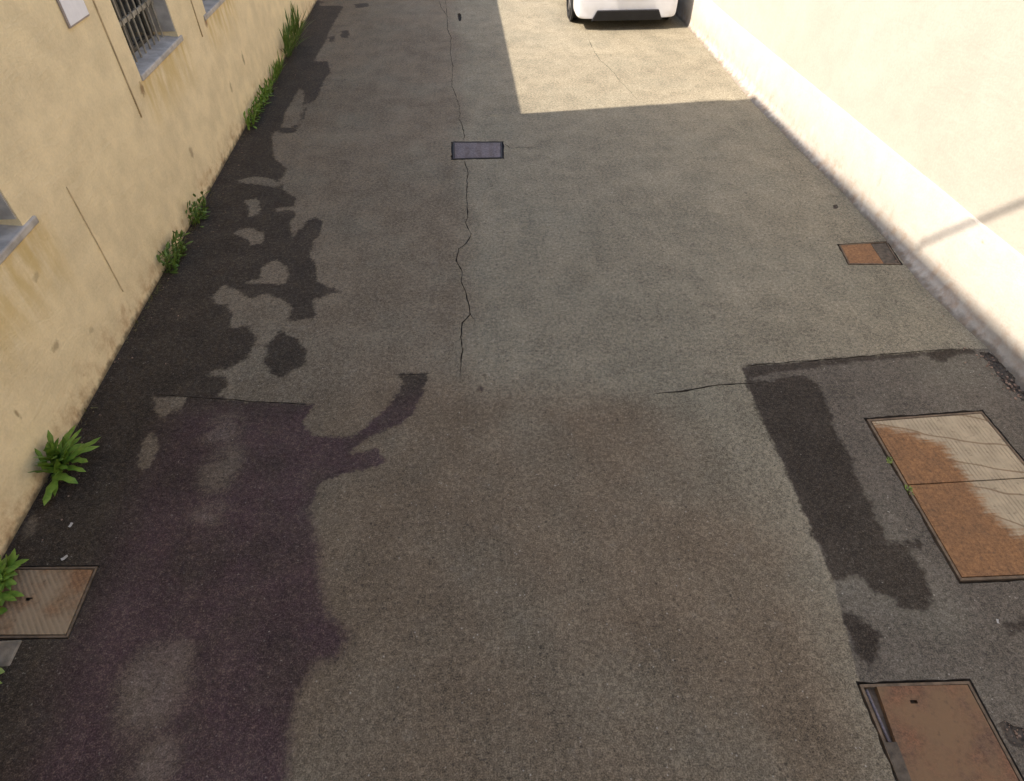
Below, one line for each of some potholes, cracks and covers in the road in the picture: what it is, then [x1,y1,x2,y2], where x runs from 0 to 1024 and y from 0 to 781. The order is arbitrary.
manhole cover [837,241,903,265]
crack [455,163,474,373]
manhole cover [864,410,1024,584]
crack [440,2,465,140]
manhole cover [450,141,504,162]
crack [650,383,754,395]
manhole cover [856,678,1024,781]
manhole cover [0,565,100,640]
